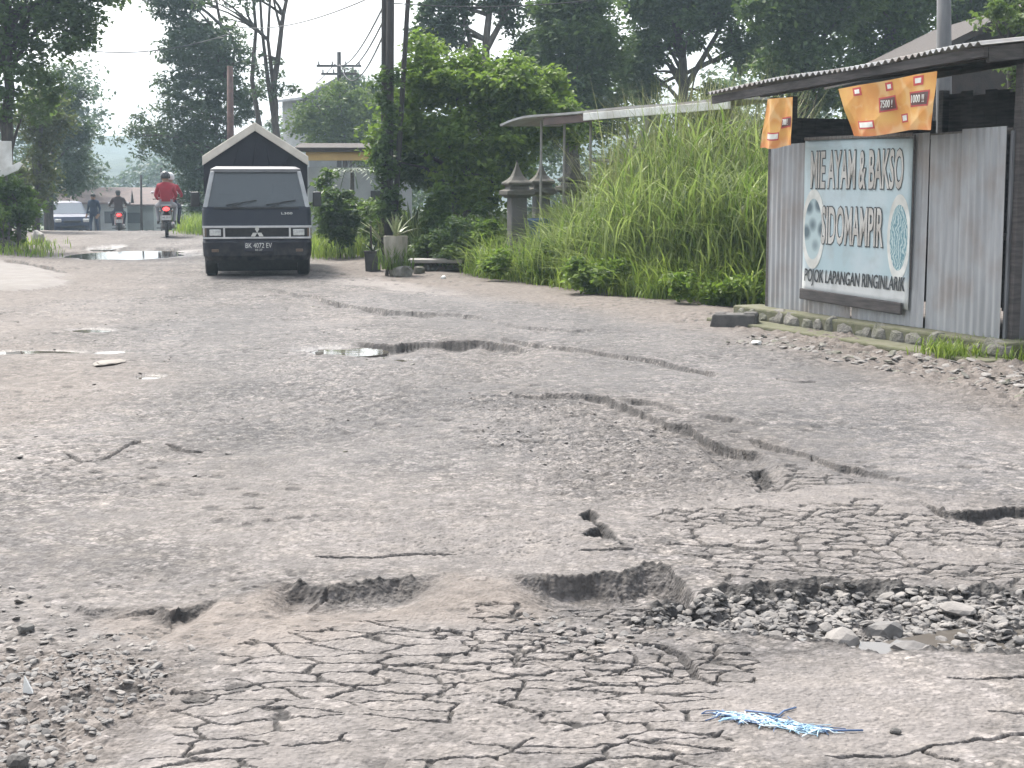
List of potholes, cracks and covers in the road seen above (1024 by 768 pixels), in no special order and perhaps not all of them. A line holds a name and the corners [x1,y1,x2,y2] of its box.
crack [259,269,721,378]
pothole [351,340,532,363]
pothole [577,509,628,547]
crack [64,440,141,463]
crack [166,443,204,453]
crack [611,378,1024,588]
pothole [625,575,1024,655]
pothole [269,572,444,616]
crack [142,601,762,768]
pothole [7,245,190,259]
crack [827,732,1024,762]
pothole [63,598,218,635]
